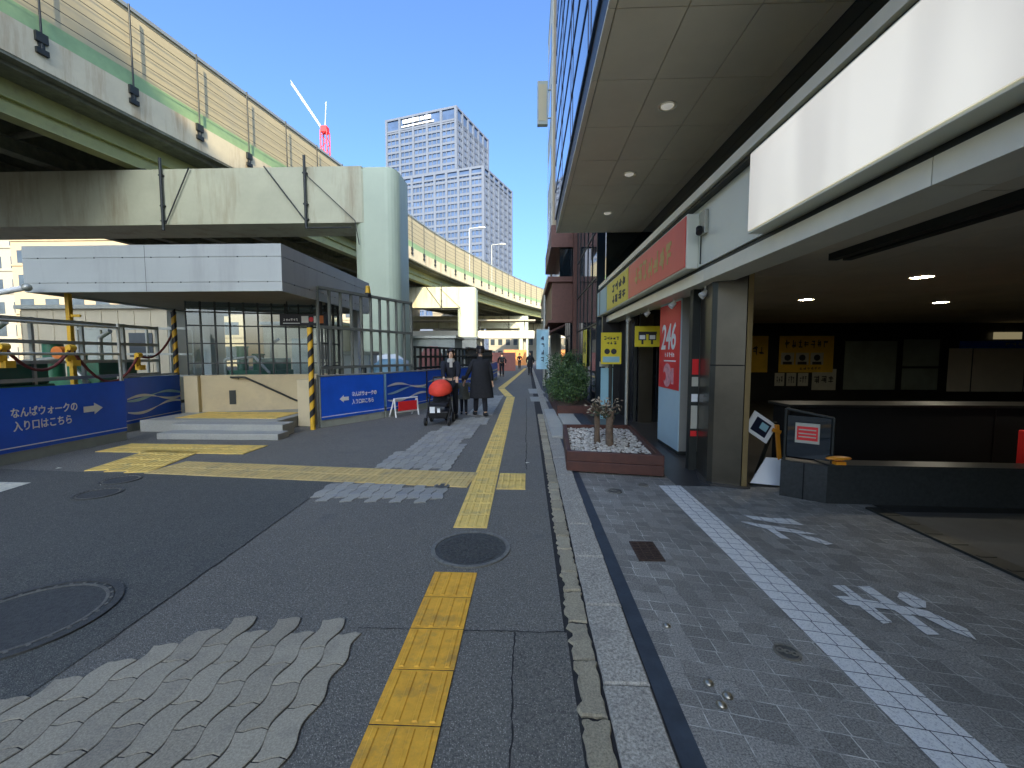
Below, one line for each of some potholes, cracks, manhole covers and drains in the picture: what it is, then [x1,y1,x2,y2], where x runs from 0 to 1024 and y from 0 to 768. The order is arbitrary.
manhole cover [0,578,125,661]
drain grate [629,541,666,562]
manhole cover [98,475,143,485]
manhole cover [70,487,125,501]
manhole cover [431,531,510,569]
utility cover [773,643,802,662]
